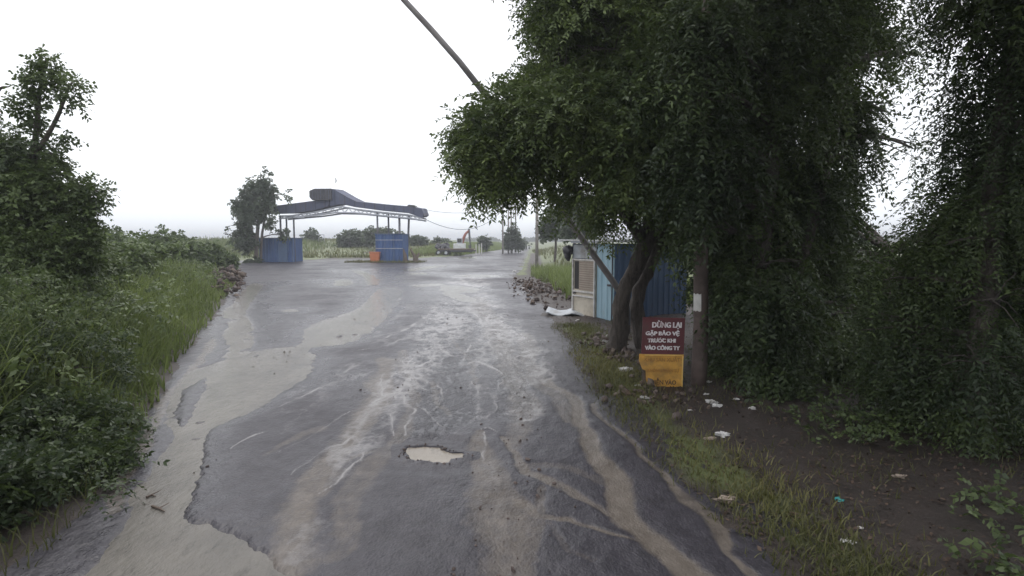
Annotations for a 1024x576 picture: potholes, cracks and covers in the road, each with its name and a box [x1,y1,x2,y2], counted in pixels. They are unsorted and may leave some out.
pothole [391,441,481,469]
